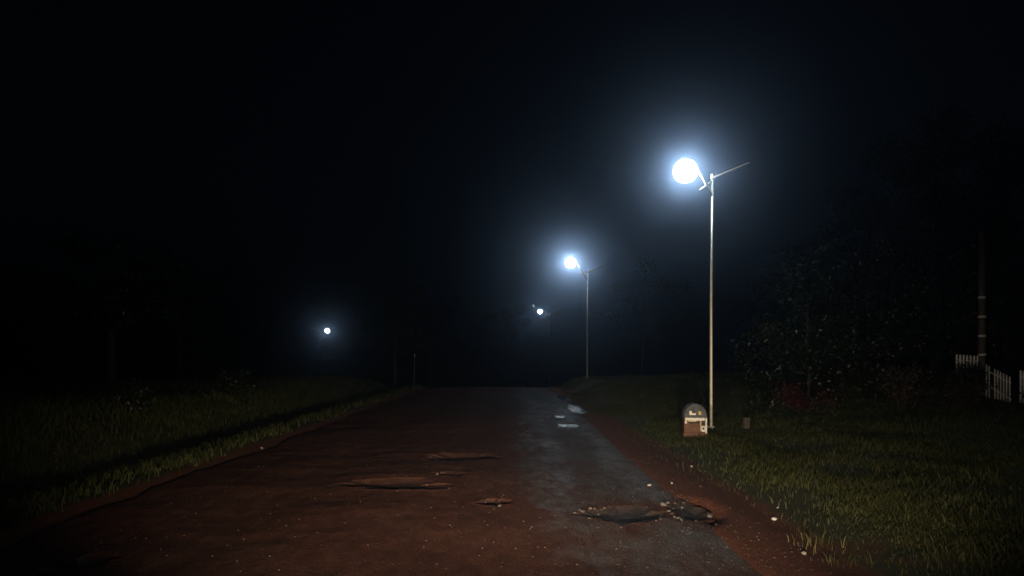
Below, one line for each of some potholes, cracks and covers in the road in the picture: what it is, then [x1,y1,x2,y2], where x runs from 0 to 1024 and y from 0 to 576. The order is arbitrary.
pothole [321,476,465,491]
pothole [470,497,519,507]
pothole [415,452,509,462]
pothole [560,504,683,527]
pothole [660,499,716,523]
